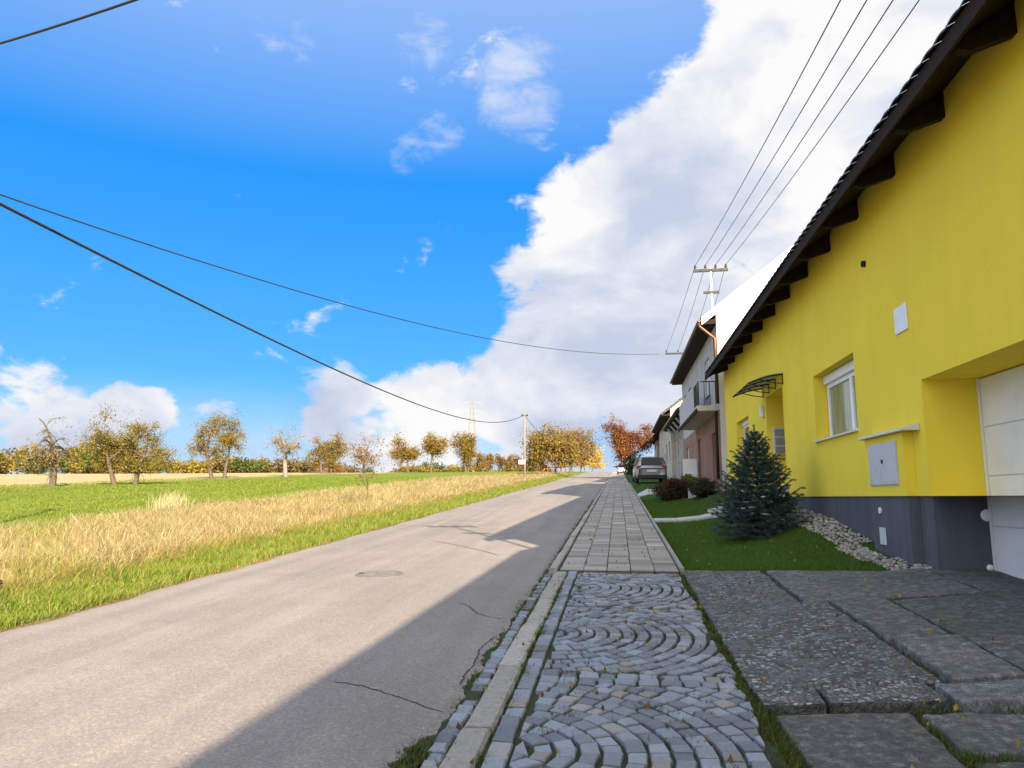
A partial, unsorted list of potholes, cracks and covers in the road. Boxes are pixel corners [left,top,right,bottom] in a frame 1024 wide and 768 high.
crack [335,681,443,712]
crack [460,637,494,687]
manhole cover [355,570,404,578]
